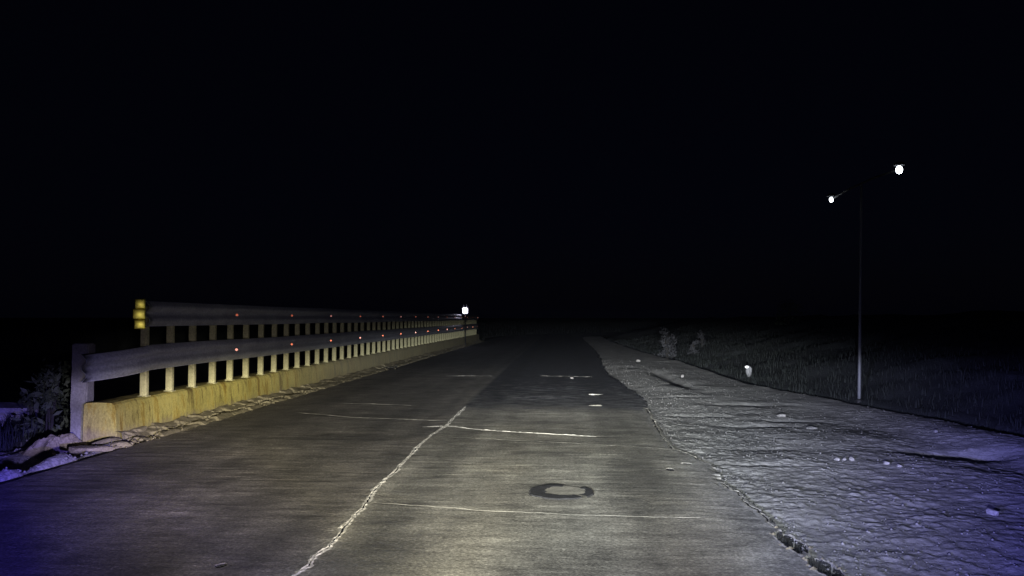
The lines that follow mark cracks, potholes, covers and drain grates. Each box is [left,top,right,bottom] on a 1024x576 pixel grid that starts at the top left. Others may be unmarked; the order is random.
crack [129,394,715,576]
